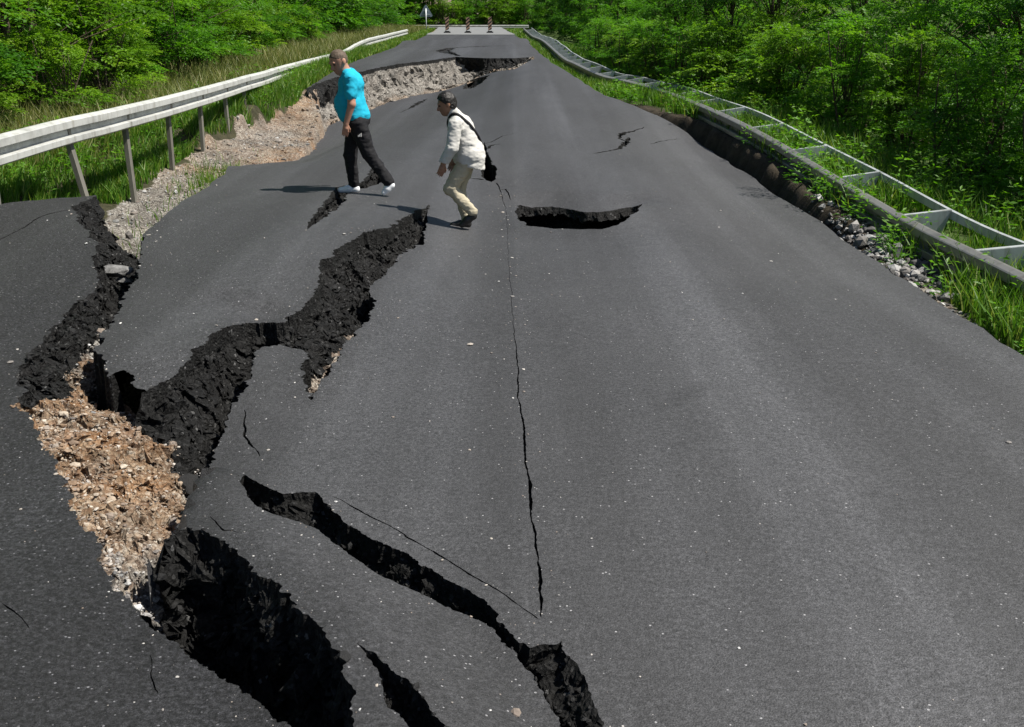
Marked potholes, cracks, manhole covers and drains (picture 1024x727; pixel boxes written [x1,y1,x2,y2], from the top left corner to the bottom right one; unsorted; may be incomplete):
crack [1,163,604,727]
pothole [515,204,642,229]
crack [598,127,675,153]
crack [306,46,534,132]
